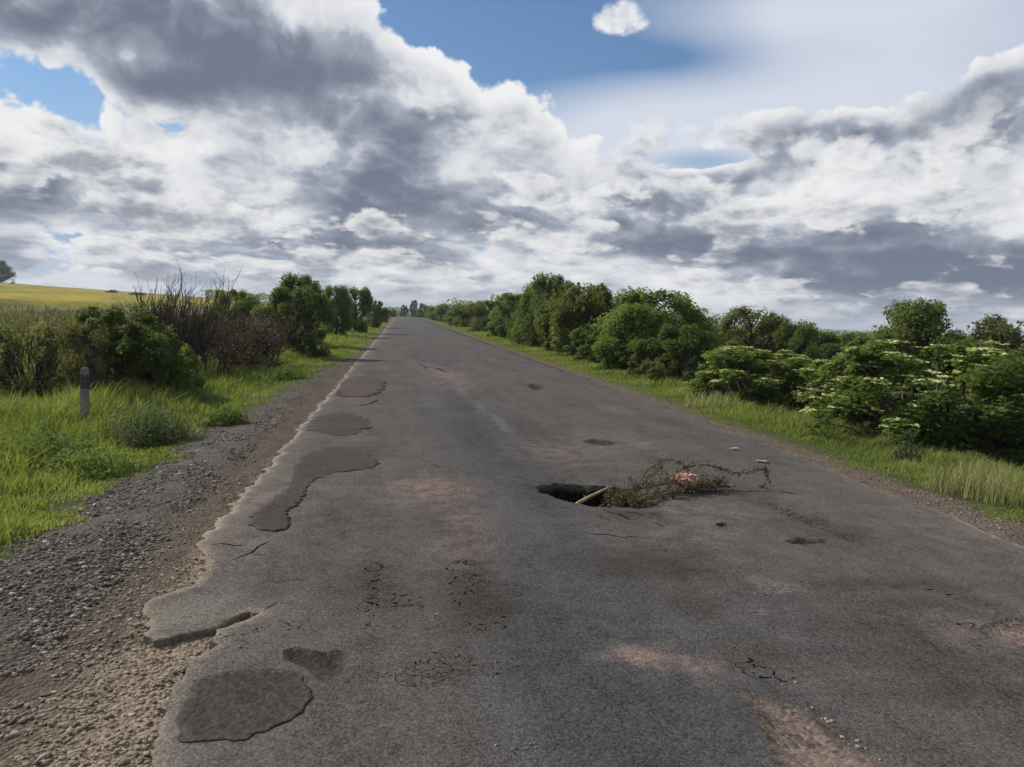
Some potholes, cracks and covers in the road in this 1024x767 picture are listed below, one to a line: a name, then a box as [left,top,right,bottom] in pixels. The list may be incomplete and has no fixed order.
crack [213,540,272,560]
crack [726,658,788,682]
crack [584,510,664,538]
crack [356,560,425,629]
crack [445,560,507,631]
pothole [784,537,832,545]
pothole [536,483,647,508]
